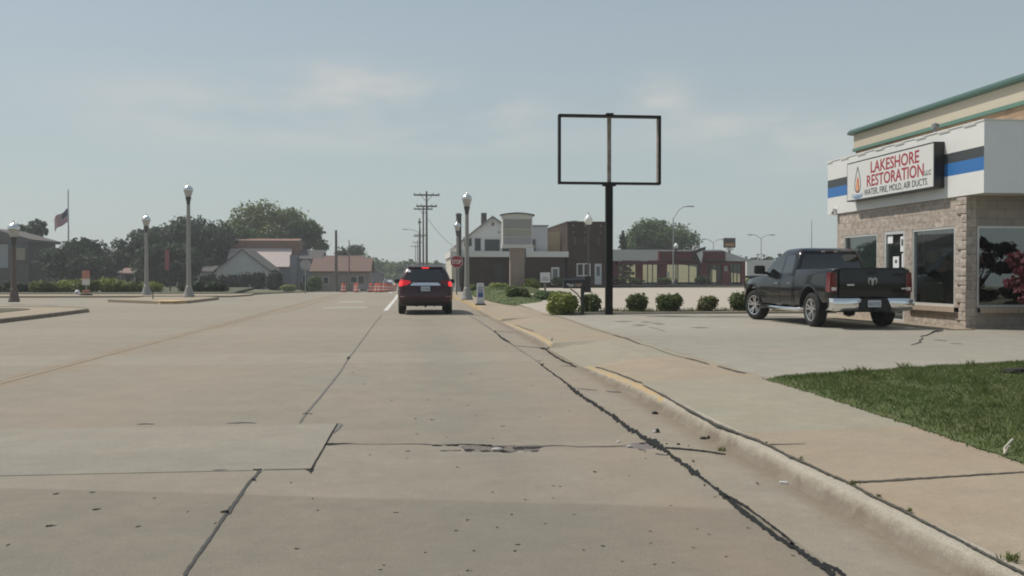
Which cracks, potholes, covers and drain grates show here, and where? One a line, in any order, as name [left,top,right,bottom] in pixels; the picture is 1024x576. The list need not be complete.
crack [540,338,577,367]
crack [641,447,725,455]
crack [912,330,960,345]
pothole [460,445,545,453]
